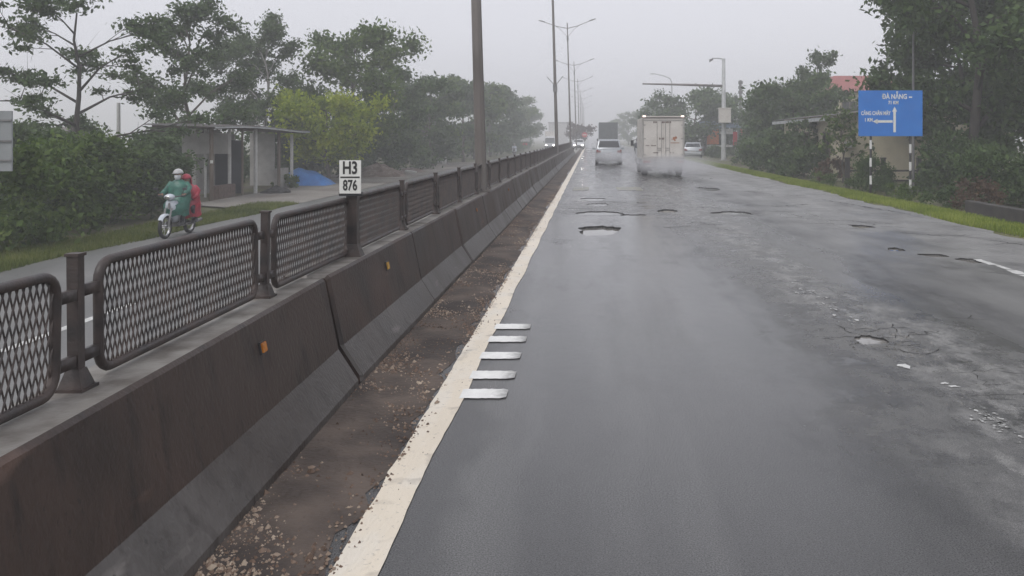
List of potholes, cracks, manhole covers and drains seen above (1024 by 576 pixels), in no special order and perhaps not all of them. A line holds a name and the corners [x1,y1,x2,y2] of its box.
crack [821,315,983,354]
pothole [578,225,621,236]
pothole [854,335,889,345]
